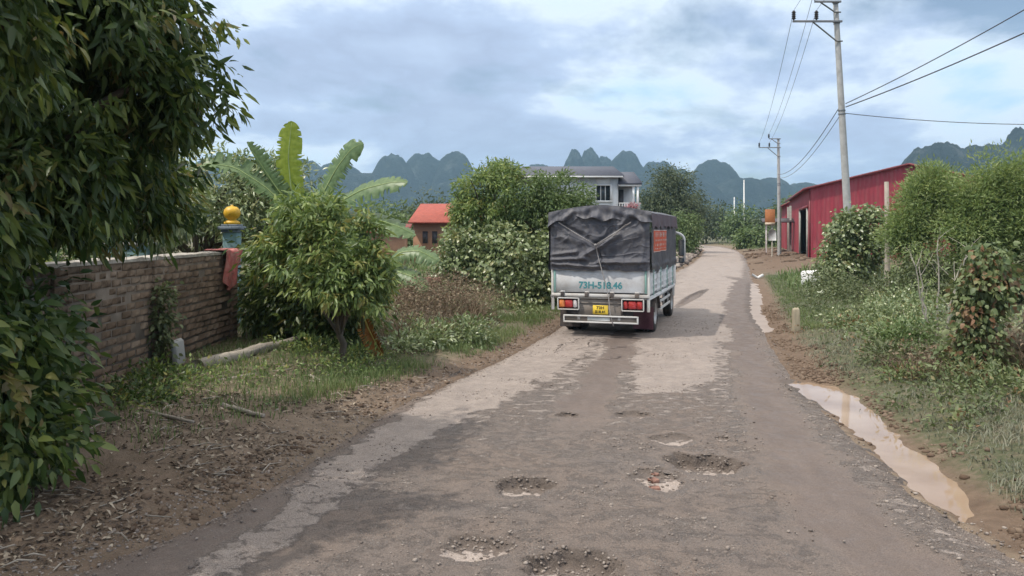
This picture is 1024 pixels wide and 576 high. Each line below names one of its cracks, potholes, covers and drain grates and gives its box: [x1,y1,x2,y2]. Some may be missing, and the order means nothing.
pothole [487,475,566,500]
pothole [642,431,702,448]
pothole [653,450,763,479]
pothole [504,543,642,576]
pothole [607,410,664,420]
pothole [620,465,694,499]
pothole [550,411,584,419]
pothole [422,532,528,567]
